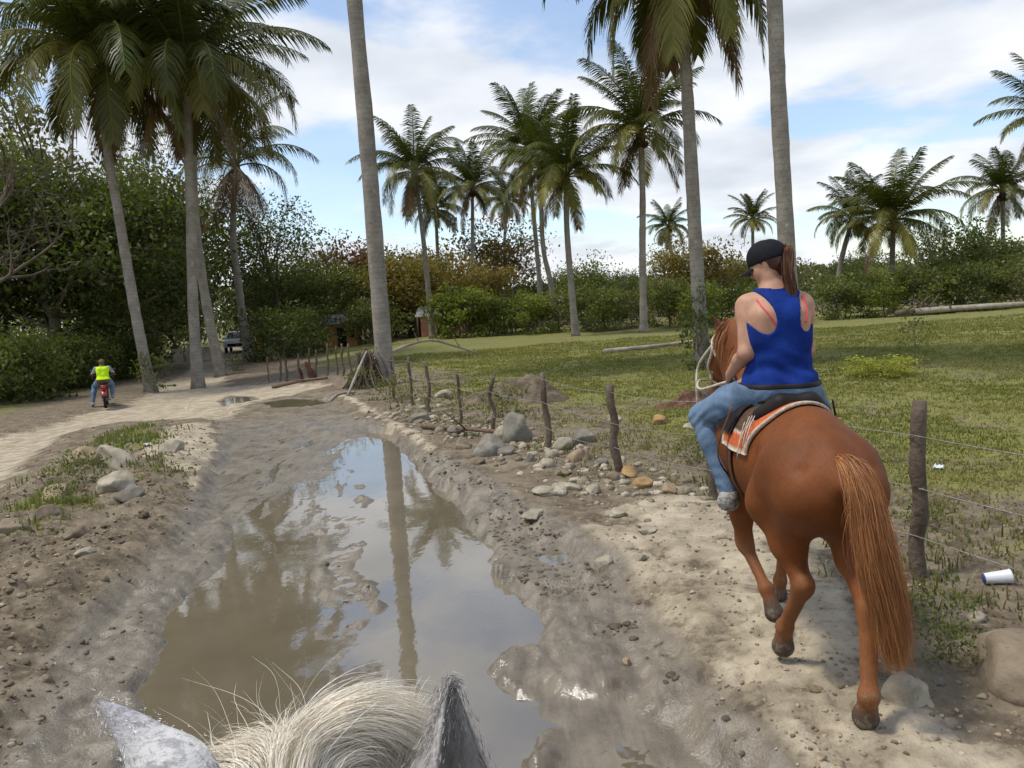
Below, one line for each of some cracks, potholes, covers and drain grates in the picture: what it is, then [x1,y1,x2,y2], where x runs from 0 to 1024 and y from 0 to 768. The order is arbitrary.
pothole [215,396,260,407]
pothole [90,423,788,768]
pothole [258,395,339,408]
